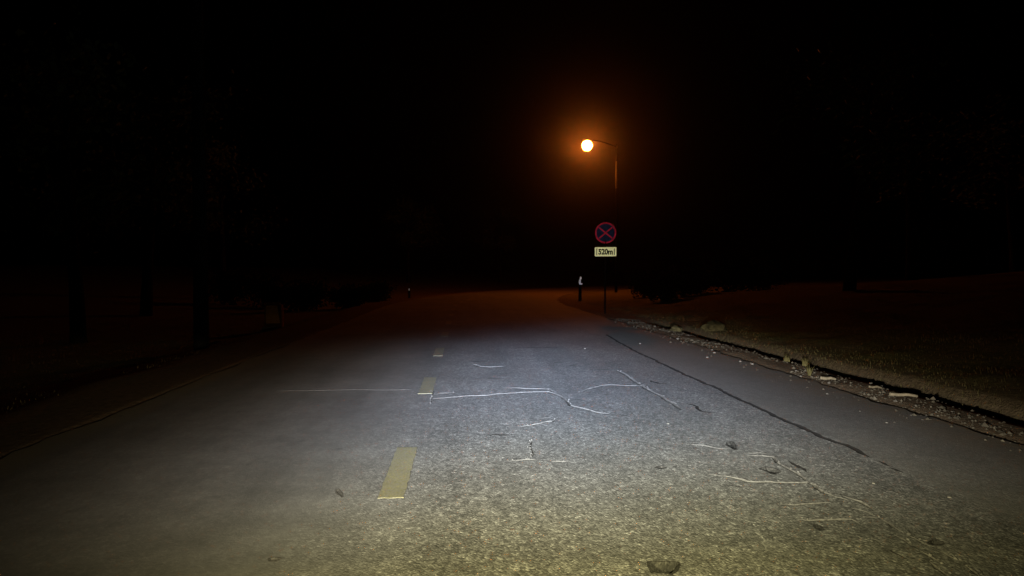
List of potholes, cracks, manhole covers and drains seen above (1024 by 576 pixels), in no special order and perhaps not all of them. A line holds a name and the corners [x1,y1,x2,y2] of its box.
pothole [759,467,782,475]
crack [428,347,713,462]
pothole [647,561,681,575]
crack [688,441,982,576]
